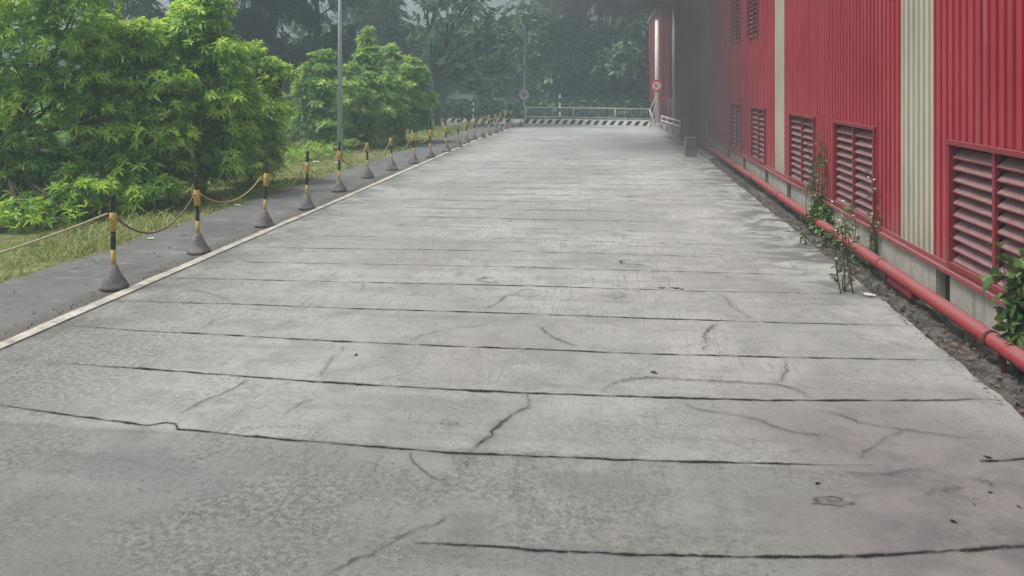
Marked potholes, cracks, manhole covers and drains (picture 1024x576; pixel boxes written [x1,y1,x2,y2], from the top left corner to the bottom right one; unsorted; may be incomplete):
crack [476,399,530,446]
